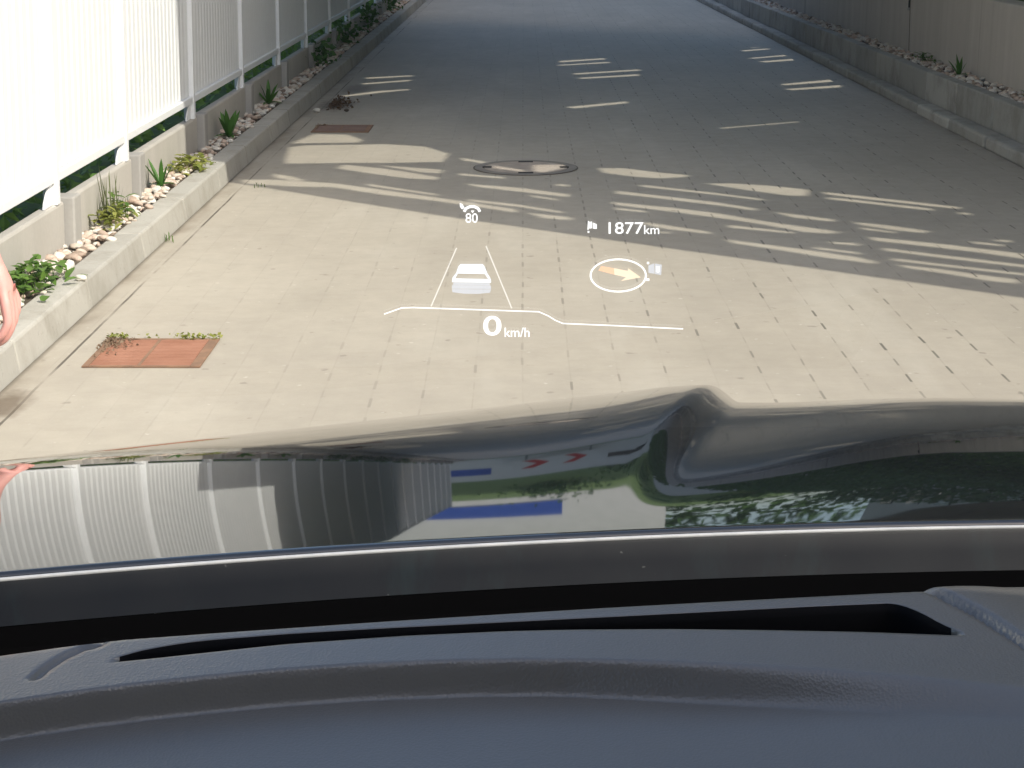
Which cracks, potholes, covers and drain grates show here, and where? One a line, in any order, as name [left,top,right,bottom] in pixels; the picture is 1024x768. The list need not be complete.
manhole cover [473,160,578,176]
drain grate [311,123,373,133]
drain grate [82,332,223,368]
